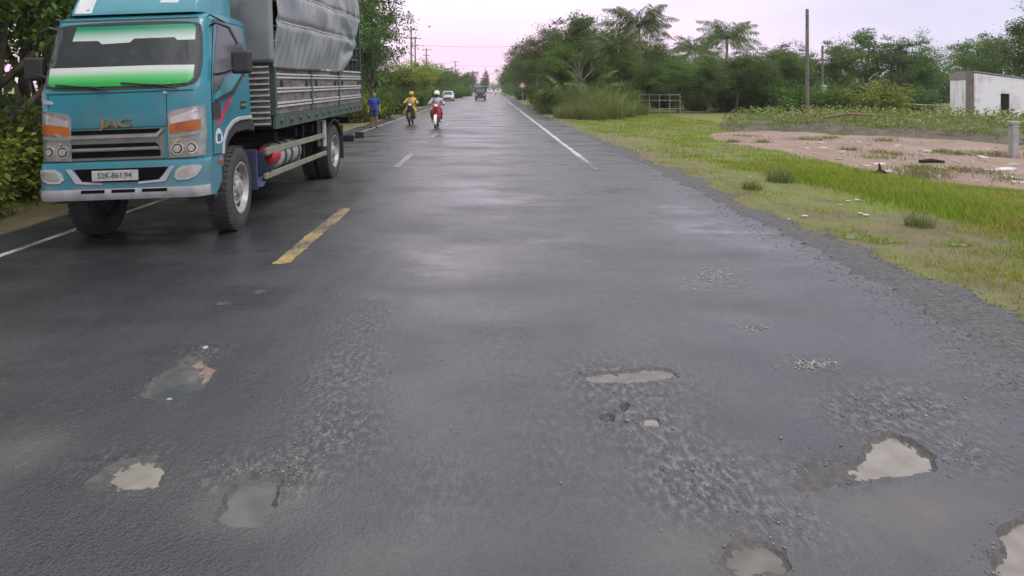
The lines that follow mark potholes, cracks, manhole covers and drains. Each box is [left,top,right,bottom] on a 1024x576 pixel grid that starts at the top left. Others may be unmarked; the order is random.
pothole [790,430,938,492]
pothole [640,417,662,427]
pothole [209,470,285,528]
pothole [990,513,1024,576]
pothole [84,454,170,492]
pothole [598,413,615,423]
pothole [582,366,677,383]
pothole [717,535,793,576]
pothole [139,356,217,401]
